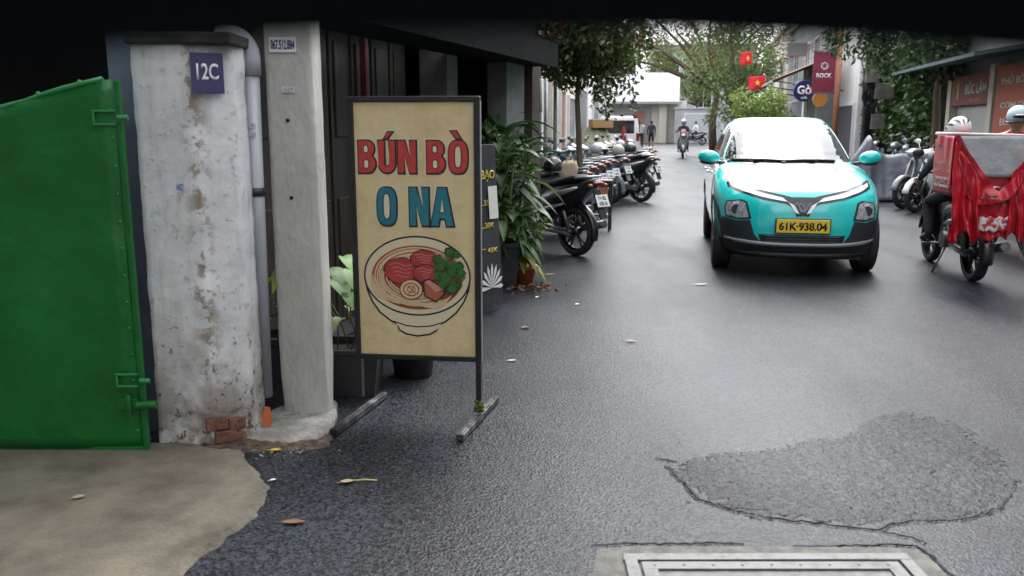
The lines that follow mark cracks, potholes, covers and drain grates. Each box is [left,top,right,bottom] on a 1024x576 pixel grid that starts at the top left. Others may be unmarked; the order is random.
manhole cover [623,553,928,576]
